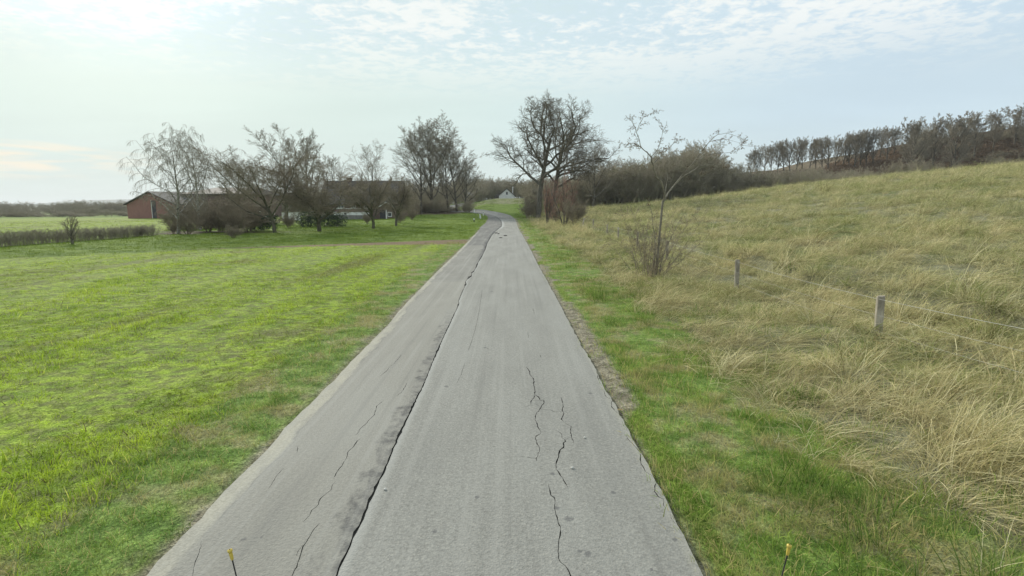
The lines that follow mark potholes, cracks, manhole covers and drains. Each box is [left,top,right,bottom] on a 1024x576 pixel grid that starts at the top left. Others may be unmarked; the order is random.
crack [519,354,574,576]
crack [292,354,406,576]
